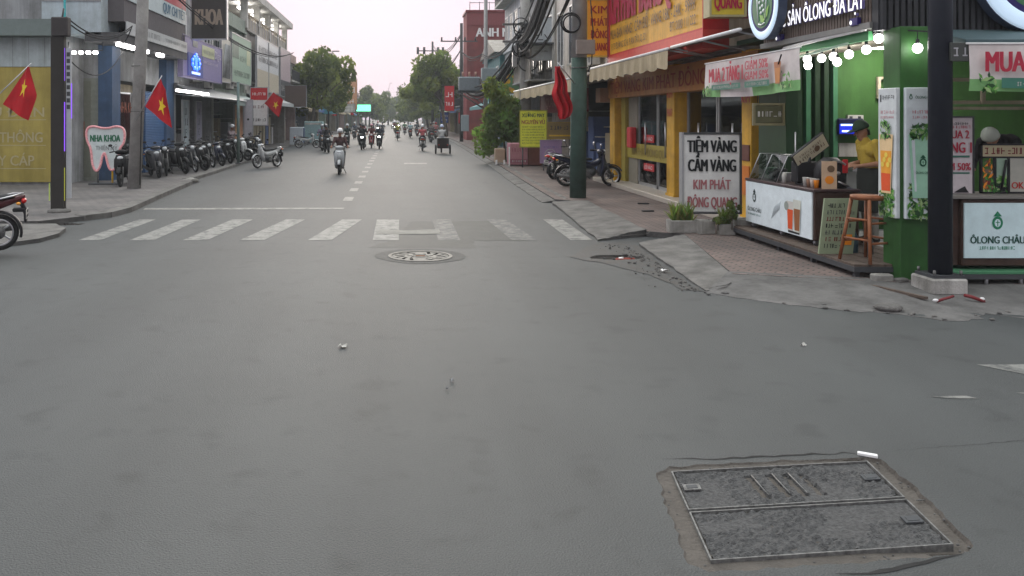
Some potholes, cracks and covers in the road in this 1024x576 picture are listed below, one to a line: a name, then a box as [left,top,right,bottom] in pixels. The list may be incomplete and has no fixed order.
crack [836,554,960,574]
manhole cover [375,249,465,264]
manhole cover [656,457,973,572]
crack [673,452,857,460]
